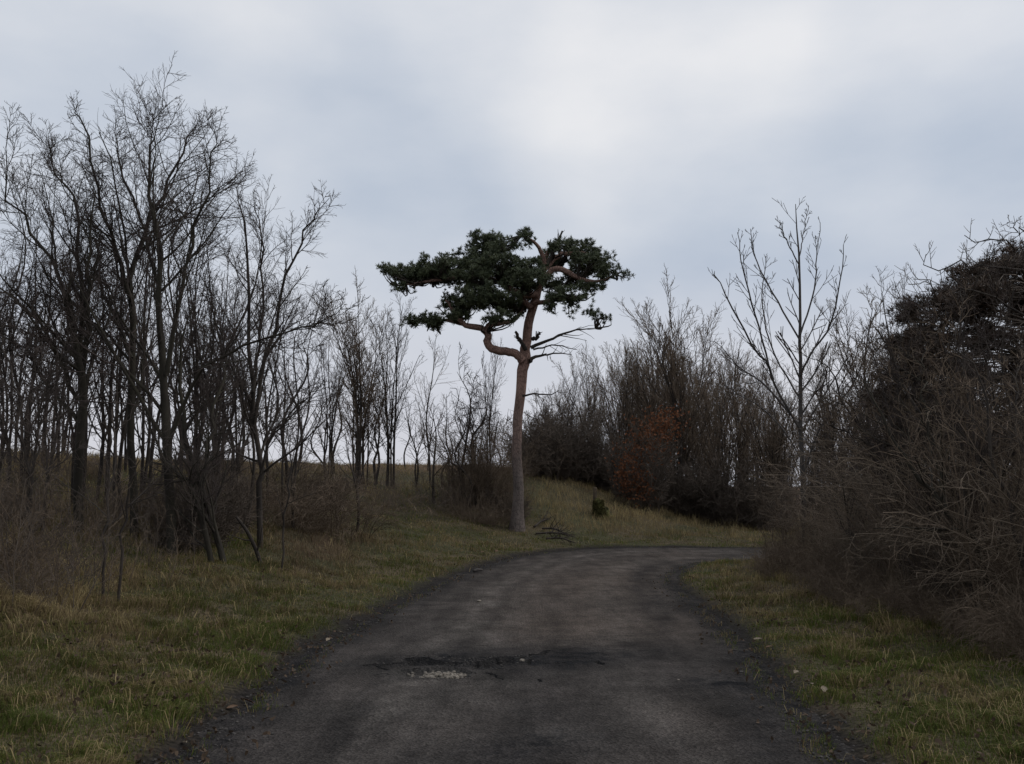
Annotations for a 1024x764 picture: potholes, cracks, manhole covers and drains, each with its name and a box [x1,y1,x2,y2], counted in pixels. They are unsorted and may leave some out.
pothole [391,667,473,679]
